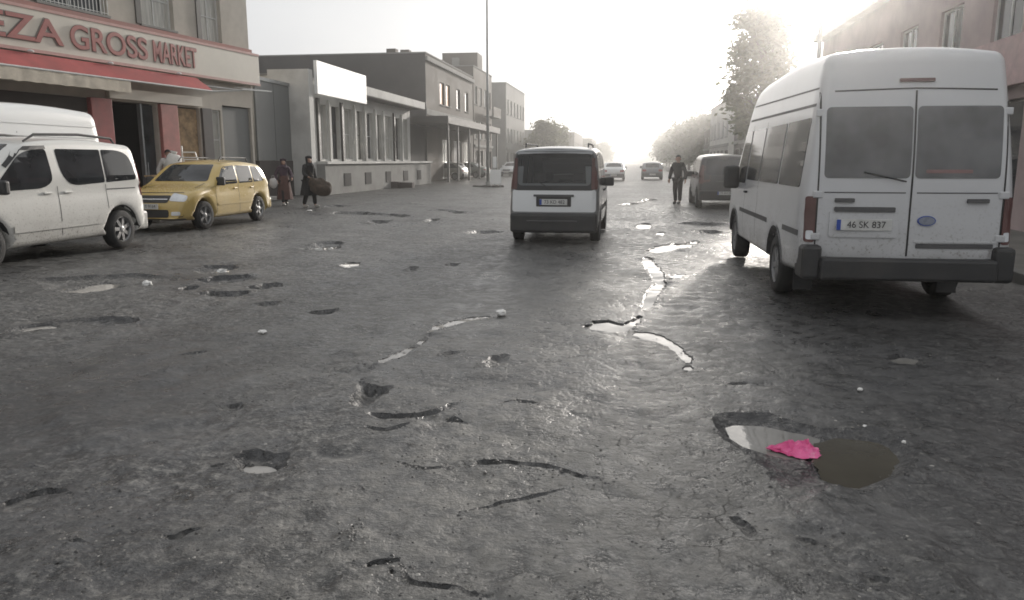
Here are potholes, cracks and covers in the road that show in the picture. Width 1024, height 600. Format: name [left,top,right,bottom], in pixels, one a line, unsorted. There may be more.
pothole [346,377,394,407]
pothole [582,315,643,333]
pothole [296,240,344,251]
crack [363,402,468,431]
pothole [4,316,140,332]
pothole [643,240,701,253]
crack [396,459,604,480]
pothole [194,274,255,284]
pothole [712,411,919,493]
pothole [231,448,292,474]
pothole [192,290,251,298]
